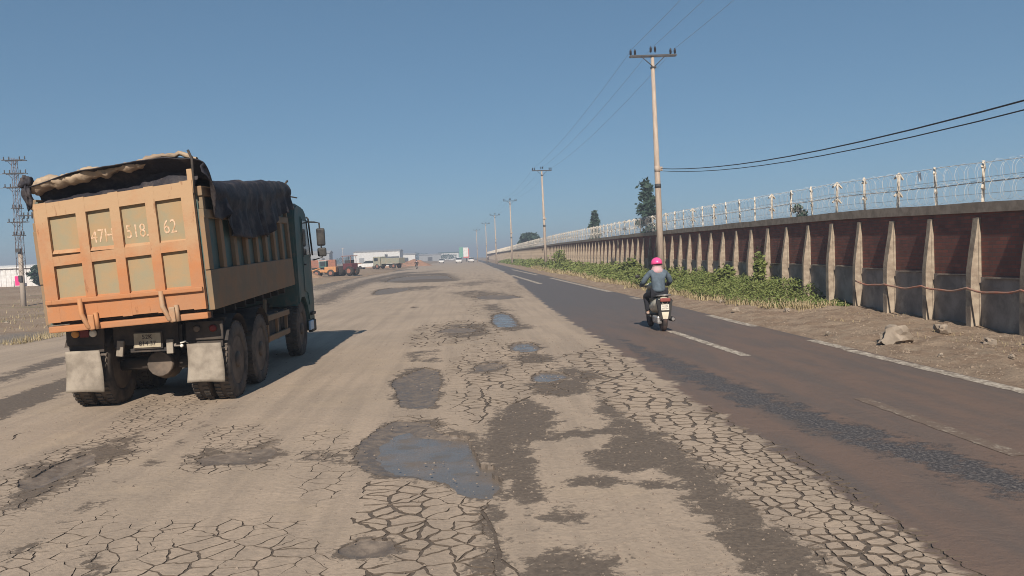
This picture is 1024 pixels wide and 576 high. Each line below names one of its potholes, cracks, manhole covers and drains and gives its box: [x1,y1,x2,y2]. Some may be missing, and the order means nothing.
crack [0,390,221,533]
crack [0,511,344,576]
pothole [352,420,504,499]
pothole [372,287,410,295]
pothole [531,371,569,382]
pothole [338,538,399,559]
pothole [509,342,541,352]
crack [172,425,284,475]
crack [394,293,986,576]
pothole [491,312,520,327]
pothole [473,362,508,372]
crack [287,429,520,576]
